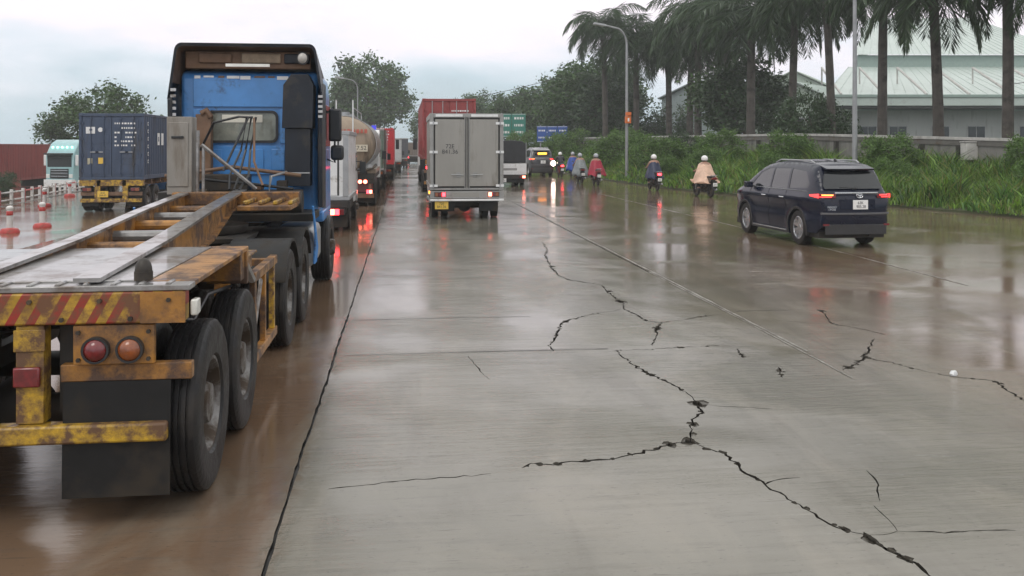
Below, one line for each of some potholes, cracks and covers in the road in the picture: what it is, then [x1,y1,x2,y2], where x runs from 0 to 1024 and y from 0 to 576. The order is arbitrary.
crack [772,310,1023,400]
crack [330,474,484,489]
crack [542,242,719,351]
crack [522,345,1016,576]
